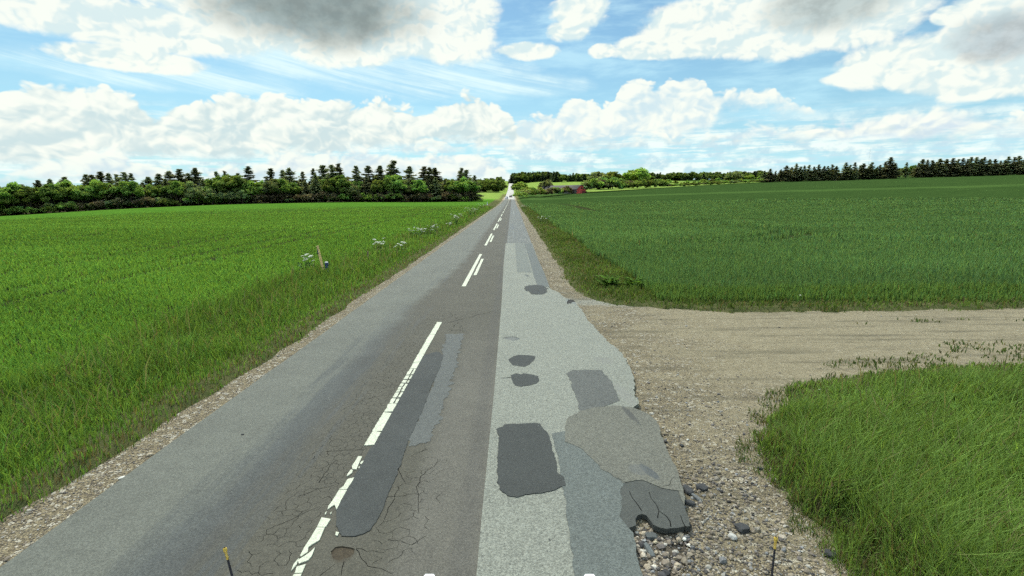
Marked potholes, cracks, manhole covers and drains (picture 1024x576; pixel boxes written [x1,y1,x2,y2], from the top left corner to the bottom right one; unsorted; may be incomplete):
pothole [331,546,355,561]
